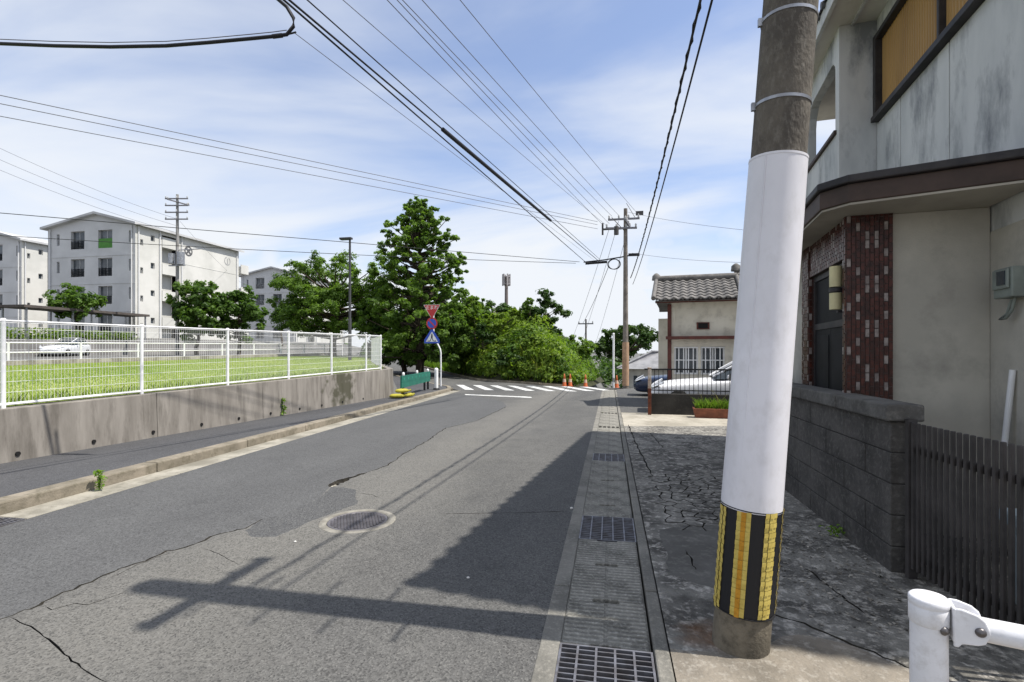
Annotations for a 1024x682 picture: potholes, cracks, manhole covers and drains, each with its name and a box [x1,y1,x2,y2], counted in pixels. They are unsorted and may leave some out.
drain grate [579,515,637,546]
pothole [328,473,365,487]
crack [648,473,723,531]
manhole cover [318,509,396,534]
crack [775,566,909,668]
drain grate [592,453,625,462]
crack [1,519,262,682]
drain grate [554,642,657,682]
